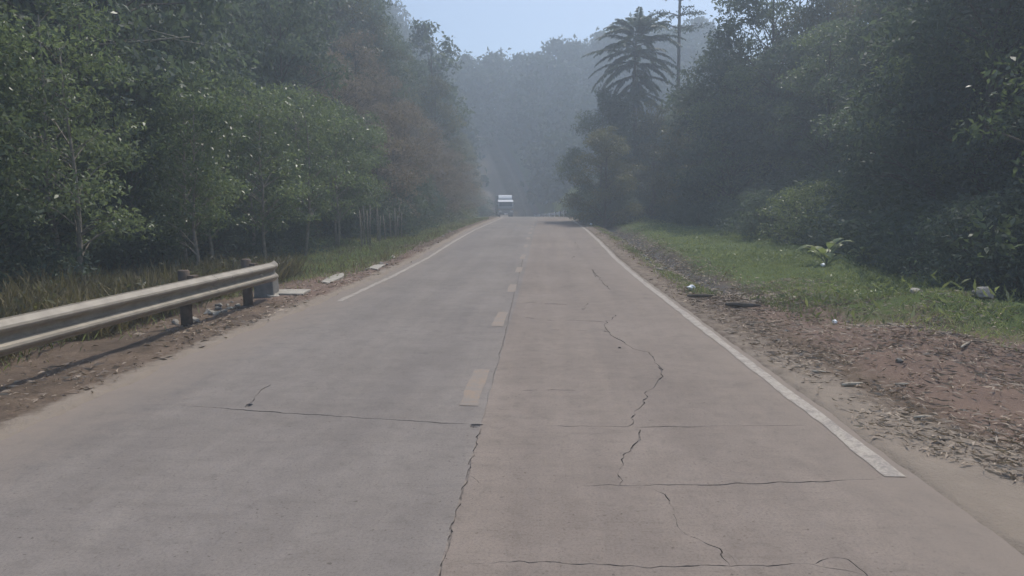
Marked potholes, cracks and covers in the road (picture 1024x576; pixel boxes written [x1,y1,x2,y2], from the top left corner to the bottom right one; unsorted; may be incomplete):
crack [196,260,523,576]
crack [477,304,868,576]
